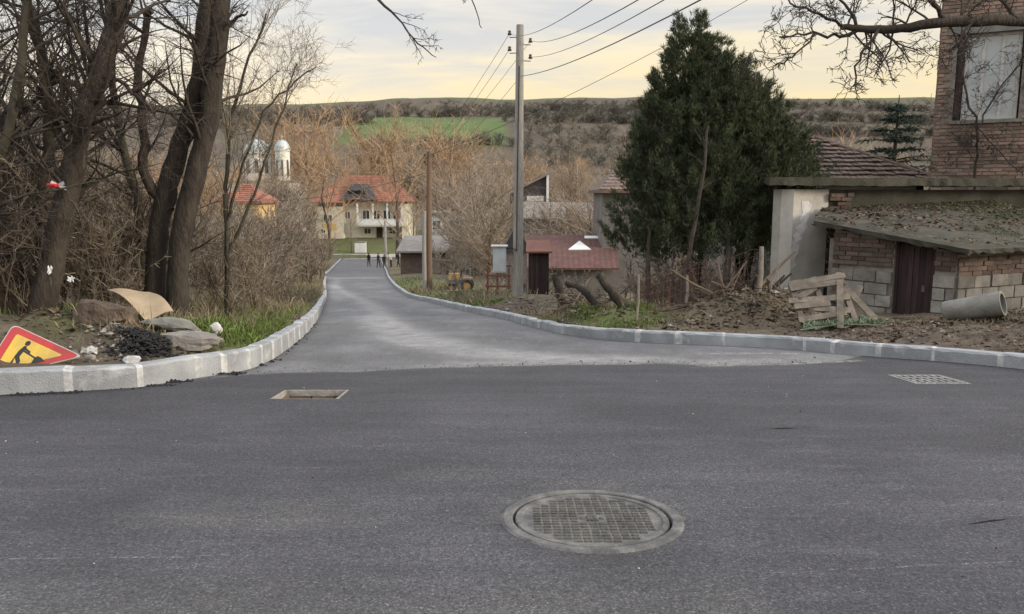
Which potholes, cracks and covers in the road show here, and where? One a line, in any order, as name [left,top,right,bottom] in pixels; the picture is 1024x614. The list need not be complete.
drain grate [889,374,971,384]
manhole cover [501,490,685,554]
